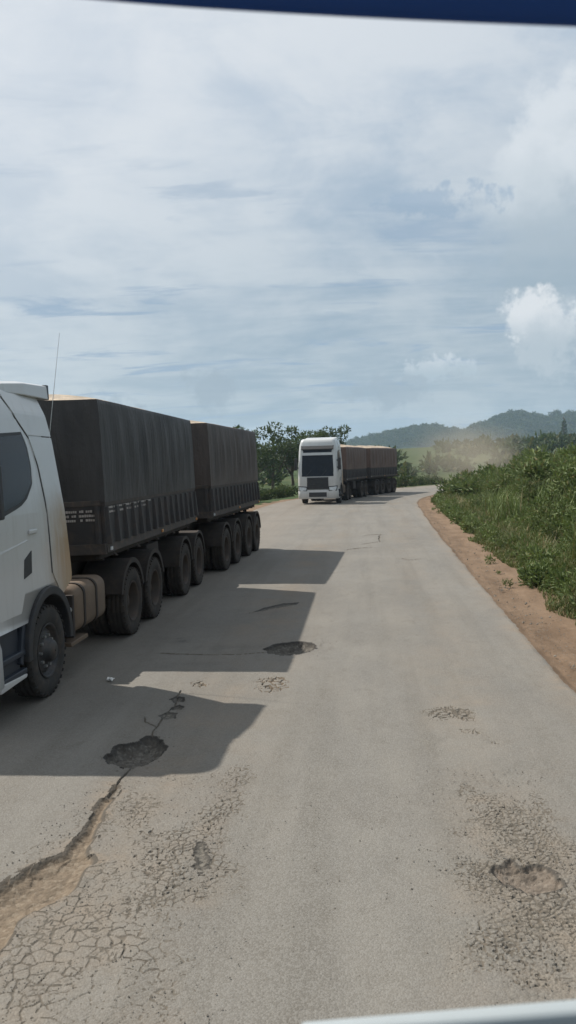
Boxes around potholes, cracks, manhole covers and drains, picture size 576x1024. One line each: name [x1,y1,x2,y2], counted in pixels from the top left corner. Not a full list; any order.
pothole [192,839,212,876]
pothole [488,858,567,898]
crack [144,681,207,737]
crack [0,764,257,1024]
pothole [103,735,169,770]
crack [439,785,576,990]
pothole [263,641,318,656]
